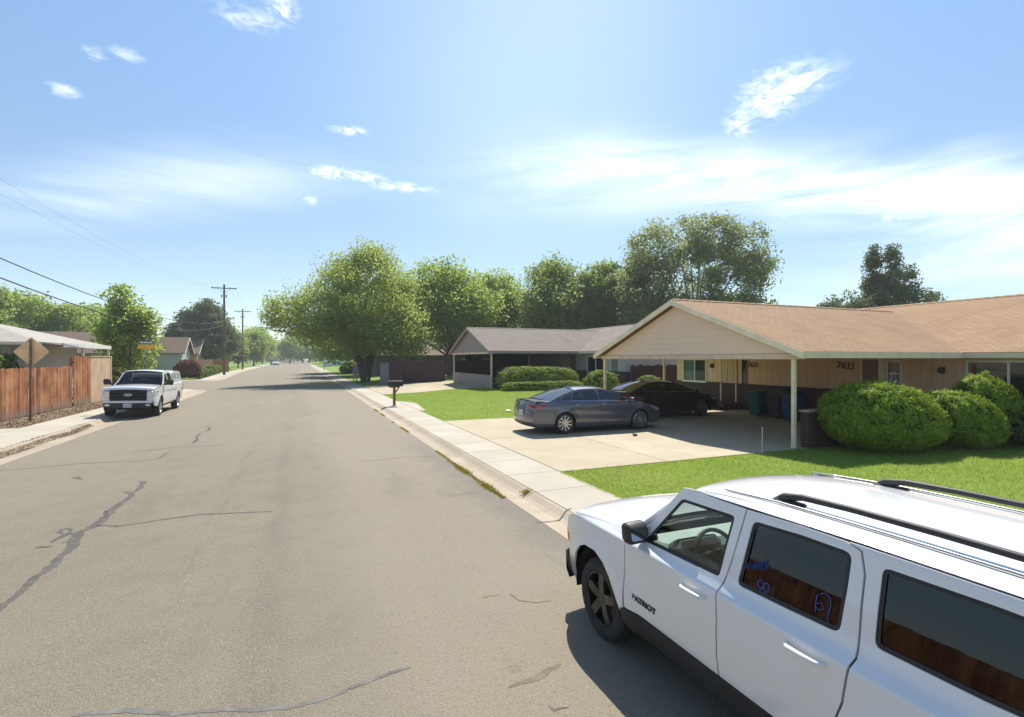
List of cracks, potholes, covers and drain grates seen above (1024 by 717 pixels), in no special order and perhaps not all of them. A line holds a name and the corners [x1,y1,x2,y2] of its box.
crack [13,445,218,470]
